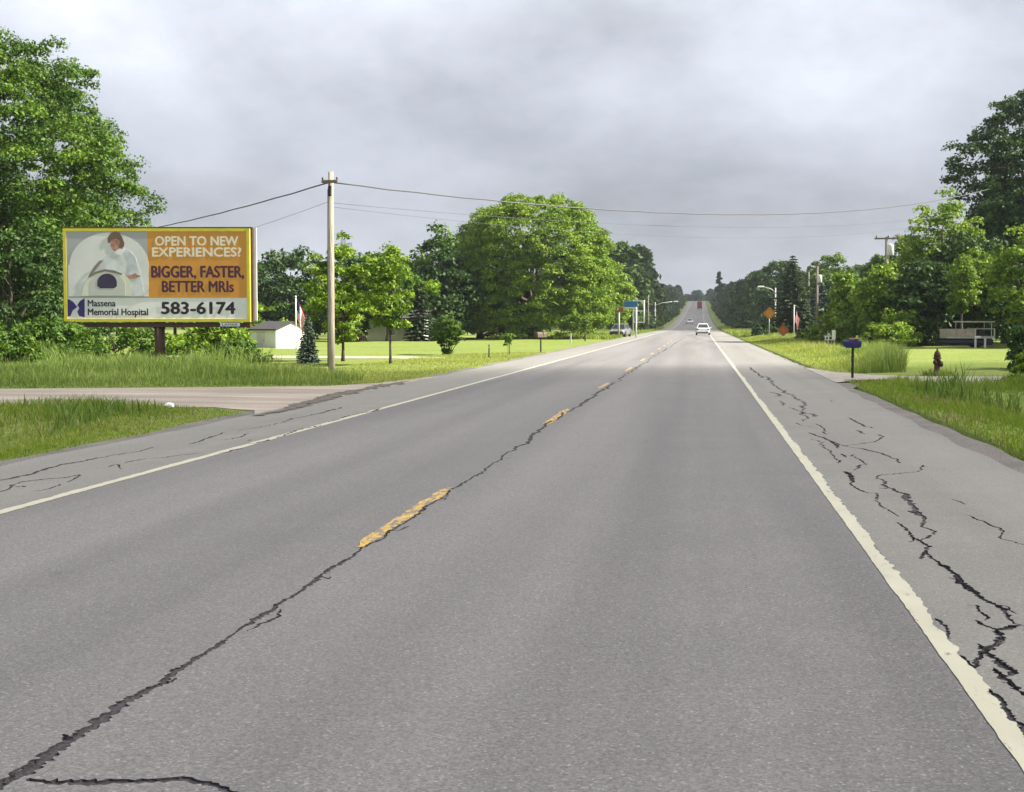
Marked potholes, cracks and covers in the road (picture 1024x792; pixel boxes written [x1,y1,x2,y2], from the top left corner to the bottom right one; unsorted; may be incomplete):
crack [750,367,1024,735]
crack [0,341,678,792]
